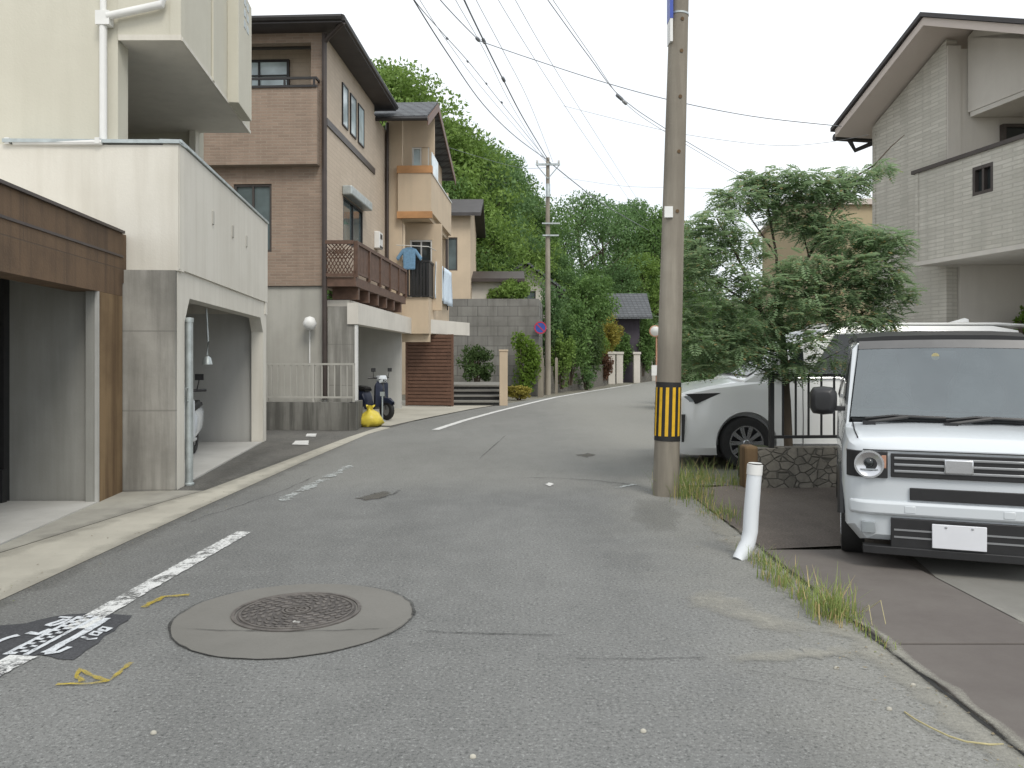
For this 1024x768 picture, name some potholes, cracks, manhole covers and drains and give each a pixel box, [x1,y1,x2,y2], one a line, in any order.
manhole cover [168,584,416,659]
